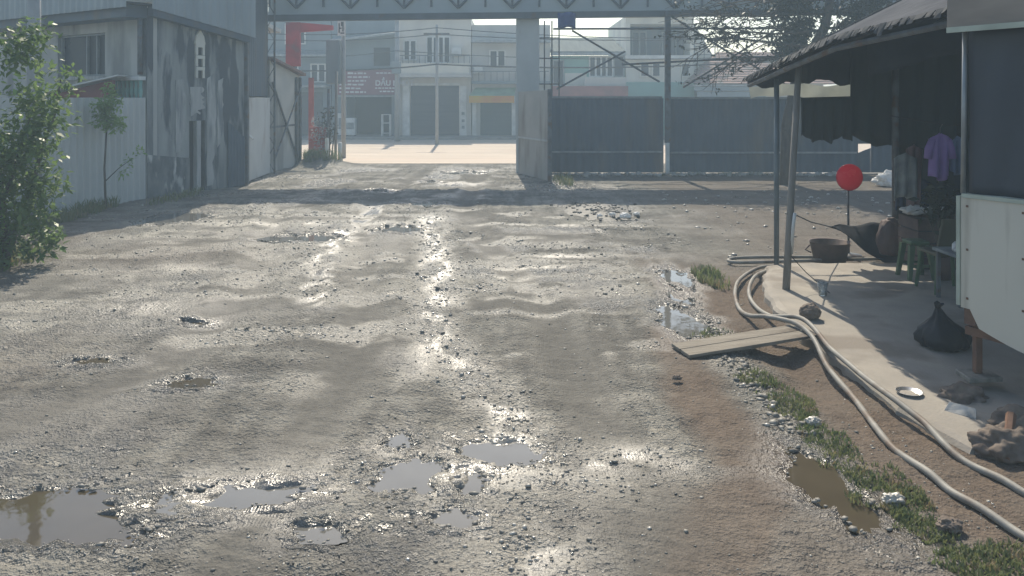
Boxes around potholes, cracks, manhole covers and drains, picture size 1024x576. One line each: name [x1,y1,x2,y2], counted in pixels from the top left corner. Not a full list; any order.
pothole [428,459,500,507]
pothole [643,297,726,354]
pothole [354,451,469,500]
pothole [408,499,503,537]
pothole [144,373,238,394]
pothole [644,261,711,302]
pothole [375,426,428,456]
pothole [275,510,368,554]
pothole [769,429,926,567]
pothole [53,353,138,370]
pothole [0,477,234,557]
pothole [428,431,565,477]
